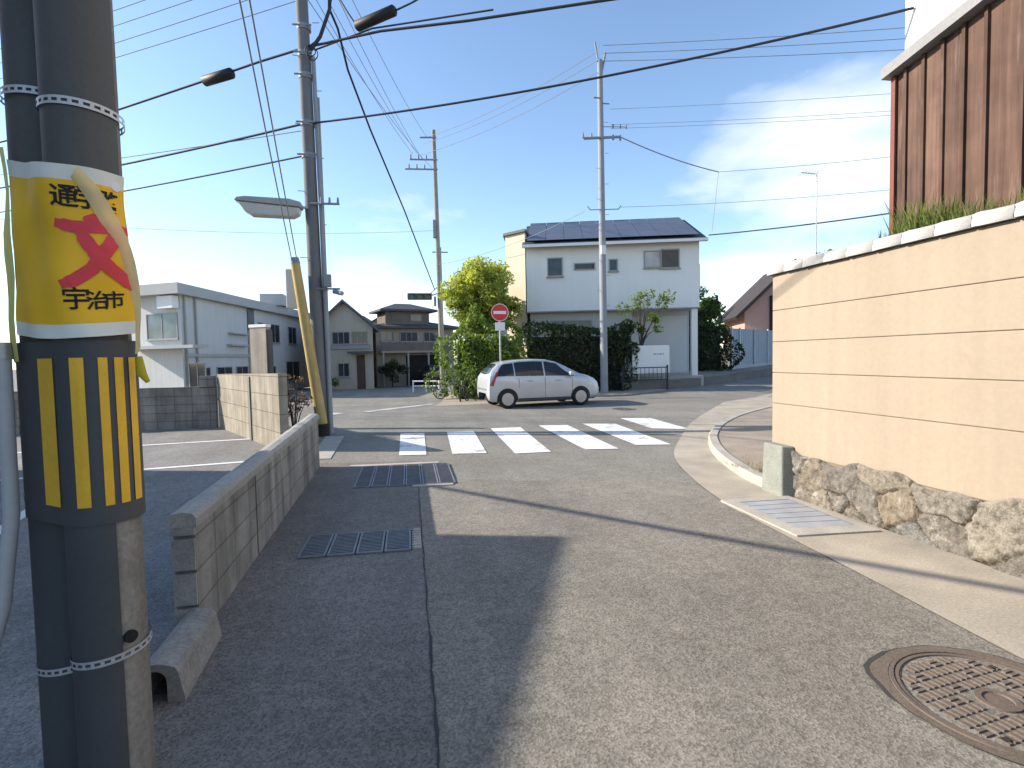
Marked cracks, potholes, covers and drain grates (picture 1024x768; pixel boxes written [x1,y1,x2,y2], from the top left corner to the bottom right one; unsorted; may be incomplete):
manhole cover [863,645,1024,765]
drain grate [297,528,412,559]
drain grate [353,463,456,488]
